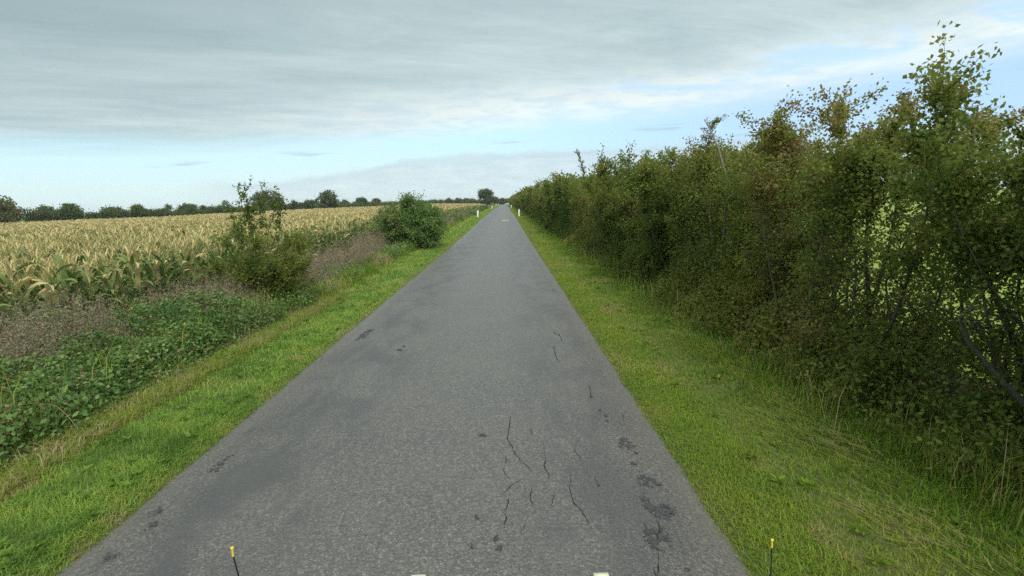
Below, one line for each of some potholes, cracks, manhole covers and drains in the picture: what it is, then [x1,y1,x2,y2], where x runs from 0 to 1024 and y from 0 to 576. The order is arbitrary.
crack [503,412,589,530]
